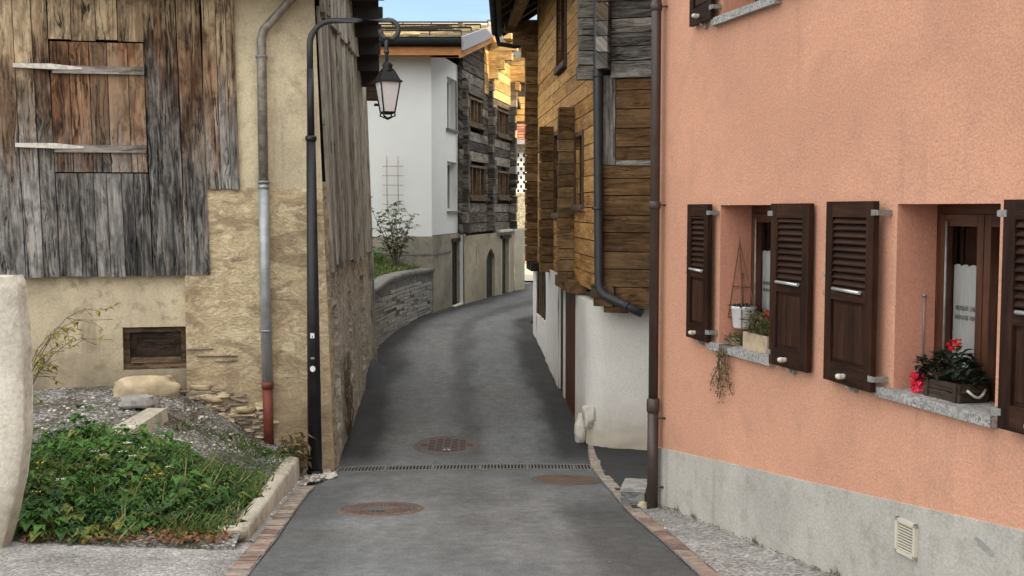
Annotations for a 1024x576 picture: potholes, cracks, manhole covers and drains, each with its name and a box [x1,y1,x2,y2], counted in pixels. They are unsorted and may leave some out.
manhole cover [413,436,481,455]
manhole cover [337,501,424,517]
manhole cover [531,474,602,485]
drain grate [335,463,592,474]
